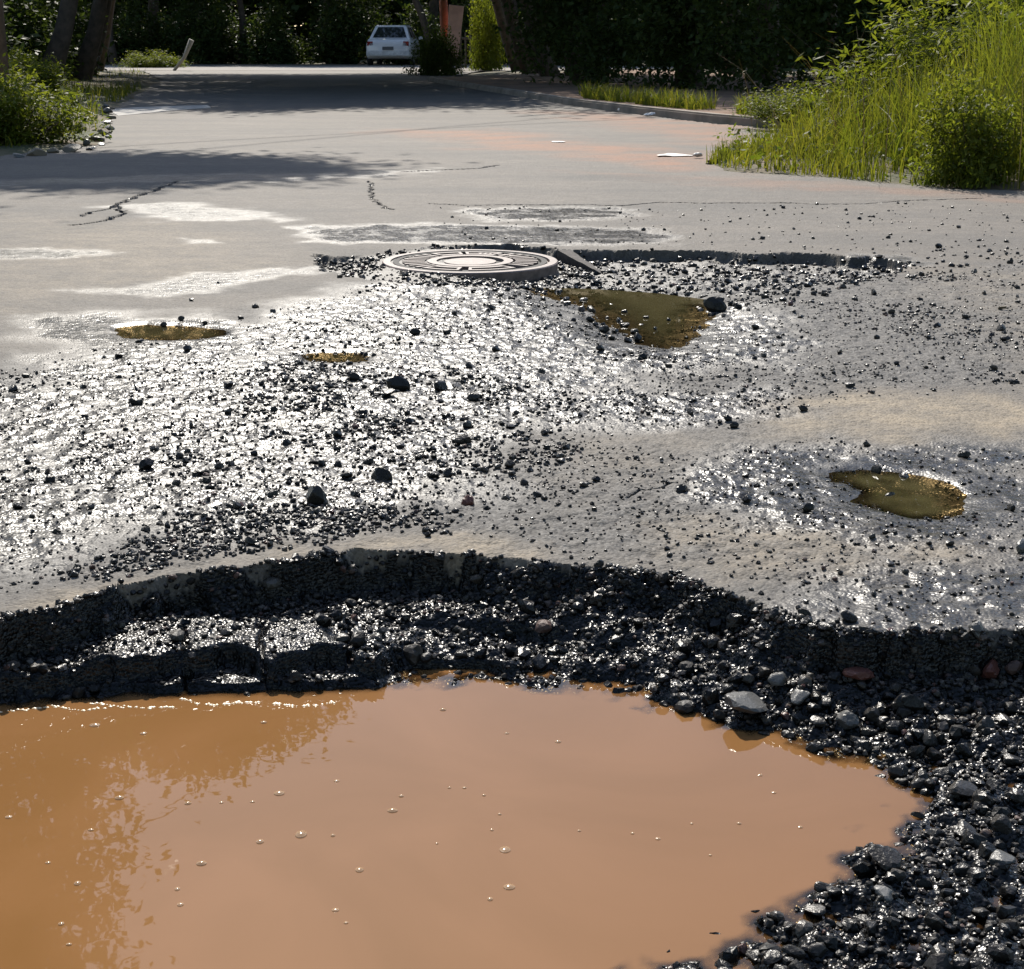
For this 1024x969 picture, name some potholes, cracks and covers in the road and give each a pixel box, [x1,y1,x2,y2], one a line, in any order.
pothole [284,348,383,364]
manhole cover [382,249,558,282]
crack [69,181,179,226]
crack [367,181,395,210]
pothole [813,463,984,524]
pothole [0,547,1024,969]
pothole [103,320,238,341]
pothole [309,243,912,363]
